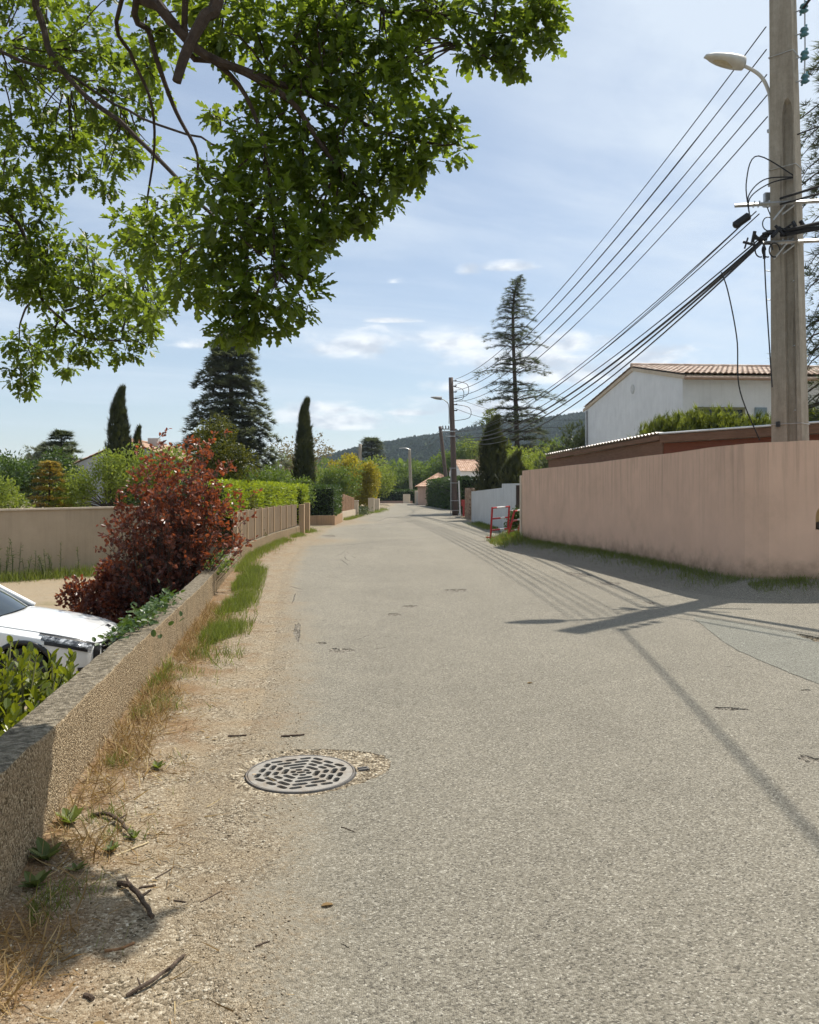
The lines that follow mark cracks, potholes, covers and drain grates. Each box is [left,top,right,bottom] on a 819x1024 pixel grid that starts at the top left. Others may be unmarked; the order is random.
manhole cover [244,755,370,794]
